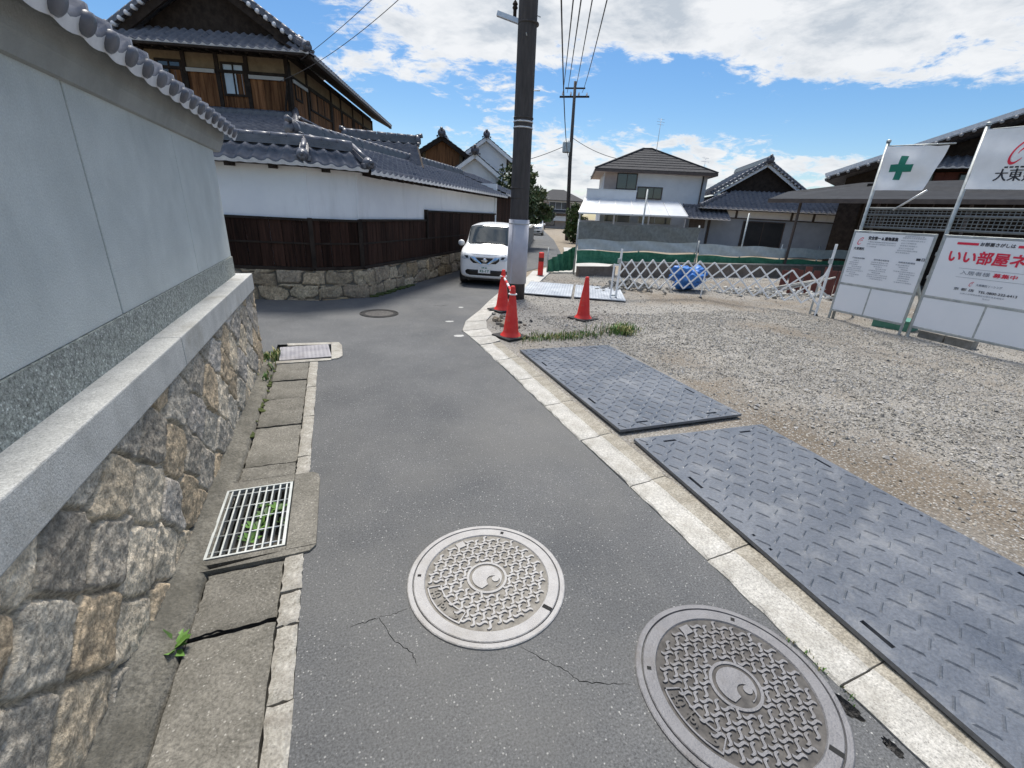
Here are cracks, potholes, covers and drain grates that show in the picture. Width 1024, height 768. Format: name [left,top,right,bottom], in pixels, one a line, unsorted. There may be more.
manhole cover [359,309,399,318]
crack [187,617,277,644]
manhole cover [407,526,565,650]
drain grate [199,472,320,592]
drain grate [274,342,343,370]
crack [521,647,630,685]
manhole cover [635,605,855,768]
crack [354,608,418,666]
